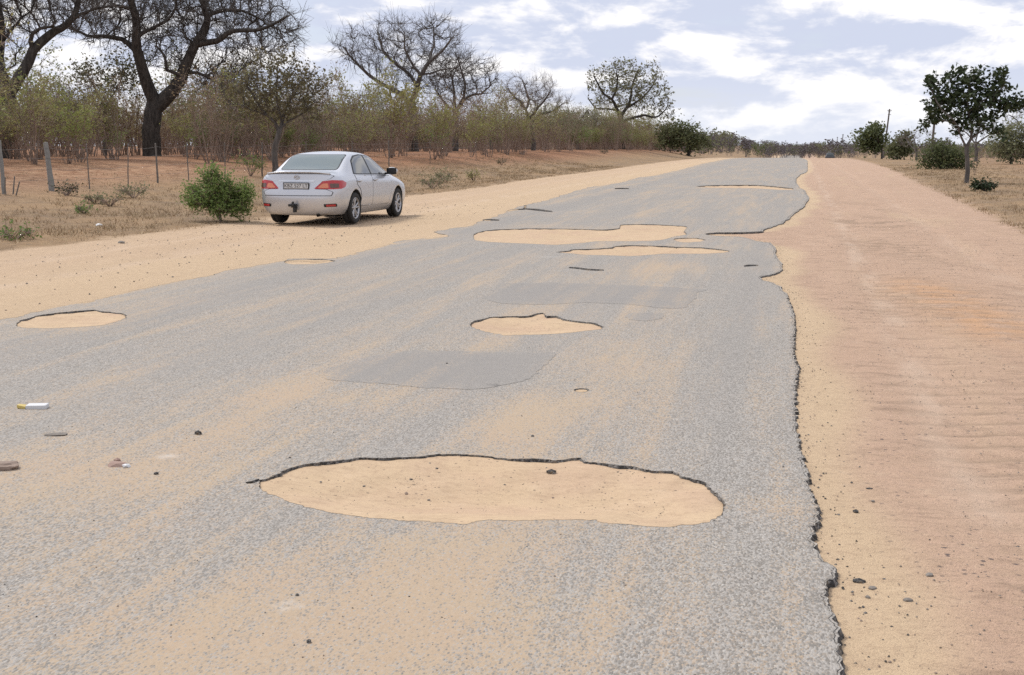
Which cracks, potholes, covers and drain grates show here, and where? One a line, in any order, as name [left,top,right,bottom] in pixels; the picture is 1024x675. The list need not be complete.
pothole [559,245,729,256]
pothole [470,313,603,336]
pothole [473,224,687,245]
pothole [16,310,127,329]
crack [483,205,553,221]
pothole [259,454,726,527]
